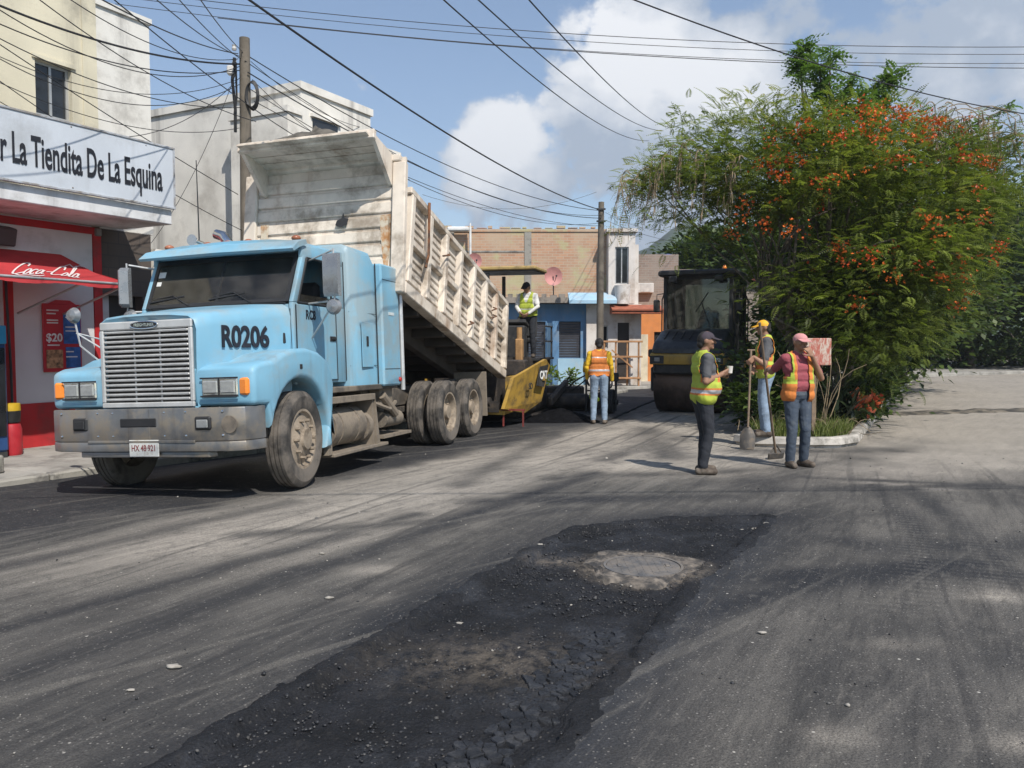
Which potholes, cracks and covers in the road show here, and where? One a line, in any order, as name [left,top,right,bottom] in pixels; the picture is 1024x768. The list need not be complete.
manhole cover [583,550,706,590]
pothole [142,514,777,768]
